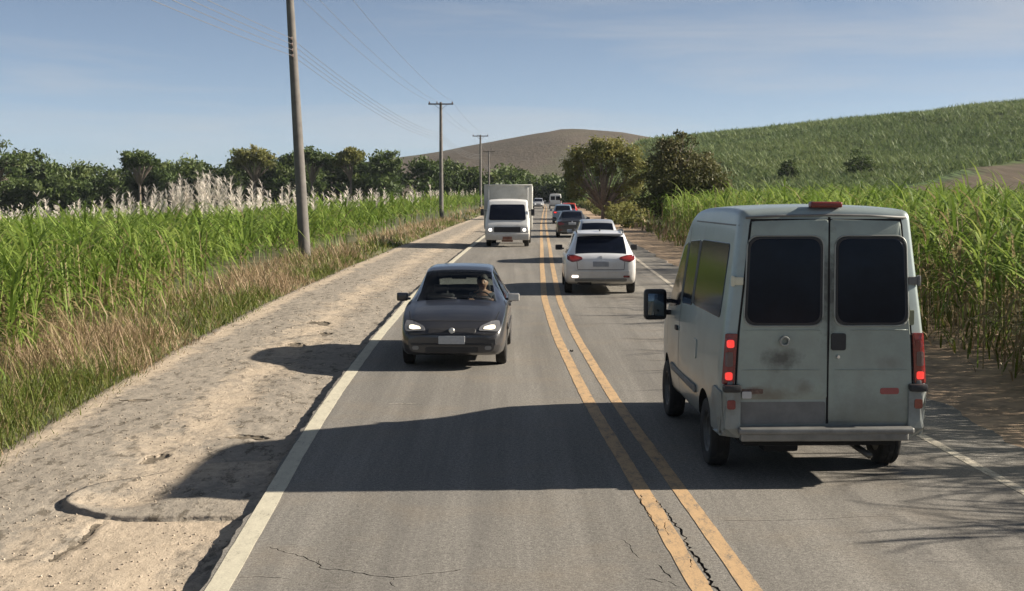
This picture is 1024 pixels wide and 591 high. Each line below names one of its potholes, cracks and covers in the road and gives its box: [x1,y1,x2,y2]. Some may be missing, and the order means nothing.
pothole [140,453,170,465]
crack [625,495,720,591]
pothole [61,460,282,522]
